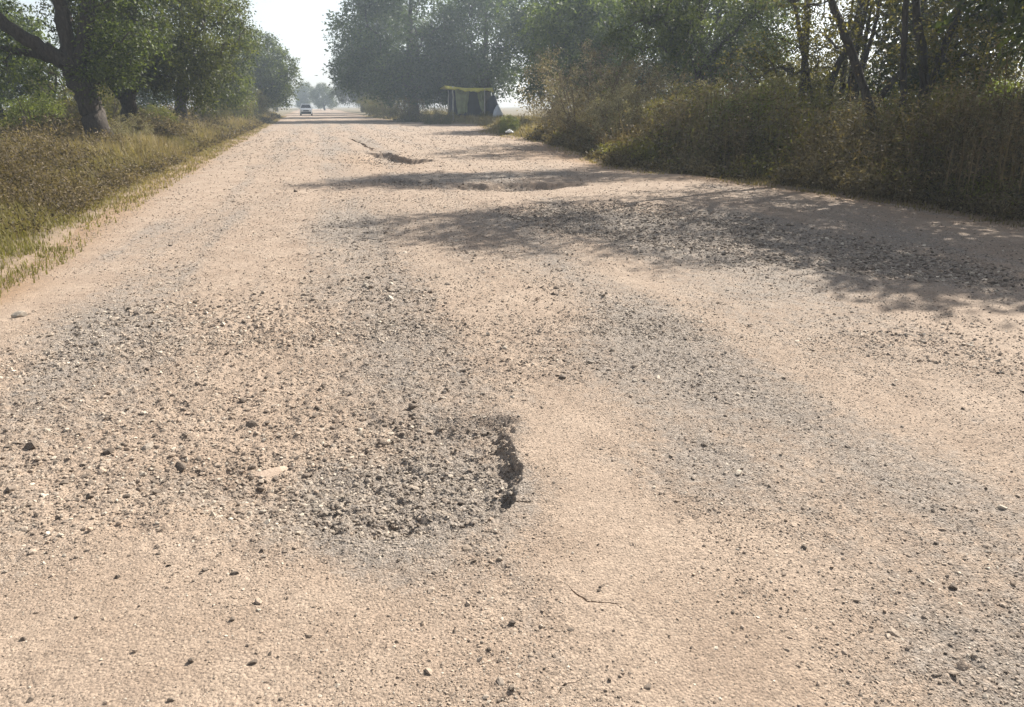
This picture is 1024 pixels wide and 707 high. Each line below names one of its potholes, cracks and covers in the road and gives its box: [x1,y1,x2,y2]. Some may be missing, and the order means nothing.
pothole [449,183,593,193]
pothole [359,153,445,165]
pothole [97,406,526,543]
crack [547,570,653,629]
